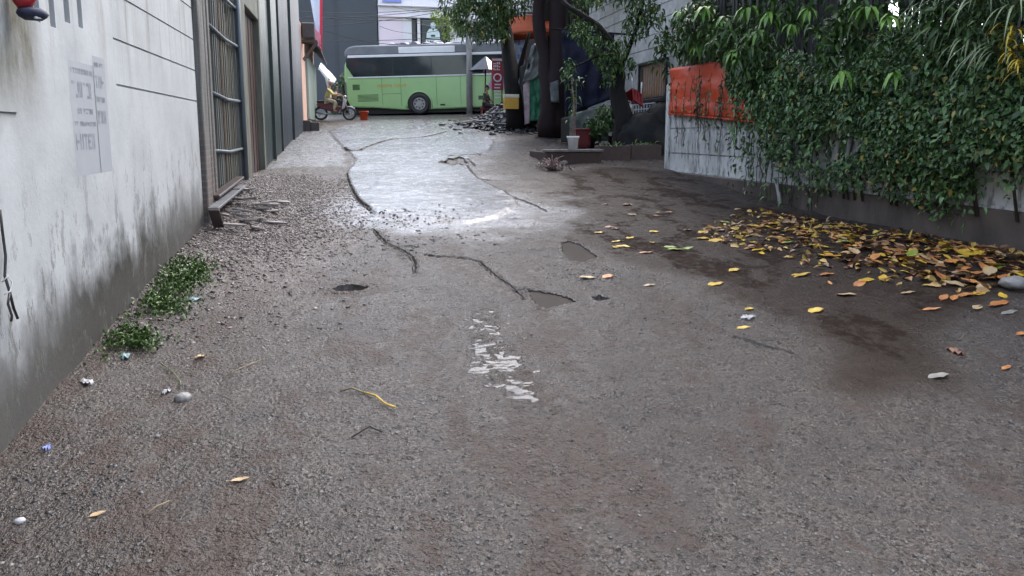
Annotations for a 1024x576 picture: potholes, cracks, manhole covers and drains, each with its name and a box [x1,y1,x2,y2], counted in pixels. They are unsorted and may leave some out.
pothole [557,240,600,264]
pothole [524,288,581,312]
pothole [328,283,374,294]
pothole [585,294,615,303]
crack [342,131,447,152]
crack [448,153,547,212]
crack [373,228,531,301]
crack [734,335,794,354]
crack [345,172,372,211]
